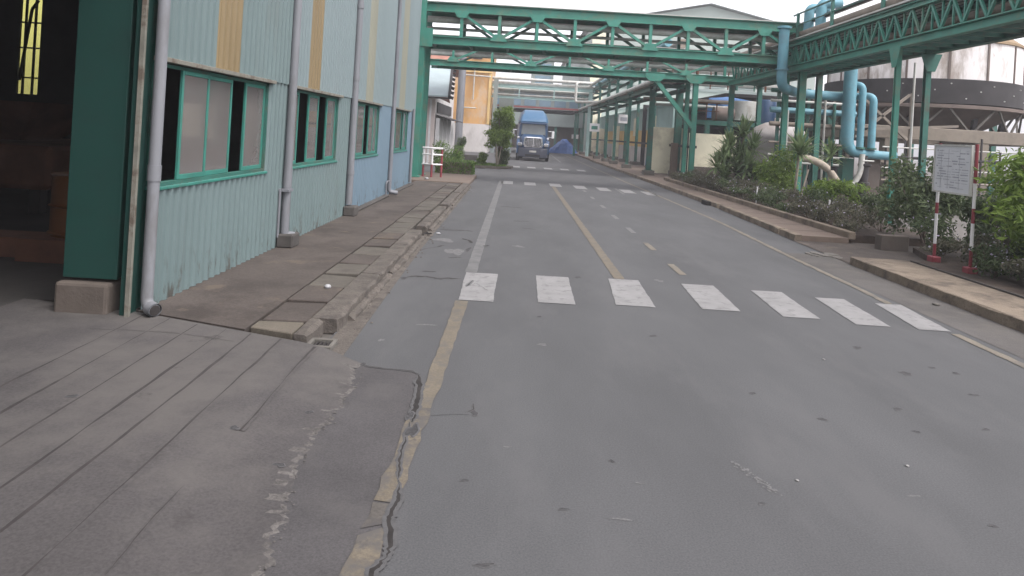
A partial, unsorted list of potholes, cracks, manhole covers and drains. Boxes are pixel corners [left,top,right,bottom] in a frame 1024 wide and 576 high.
drain grate [308,338,338,351]
crack [407,229,490,290]
crack [364,375,475,576]
